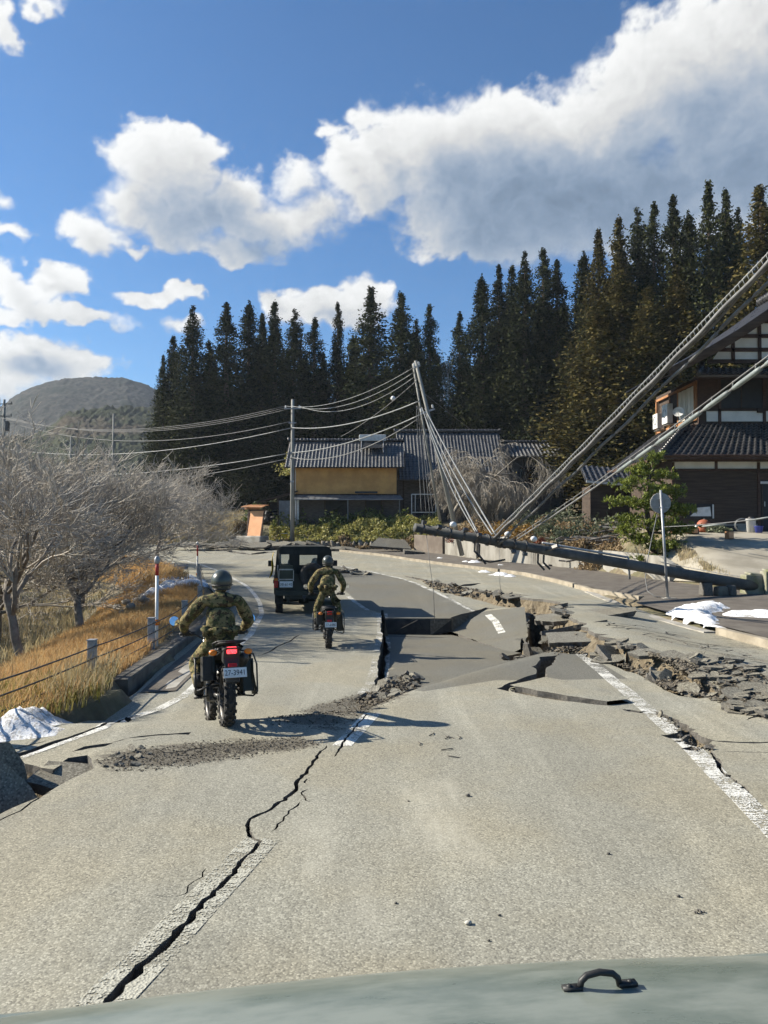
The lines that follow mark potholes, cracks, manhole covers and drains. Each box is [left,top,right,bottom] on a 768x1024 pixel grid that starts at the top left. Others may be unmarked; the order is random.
crack [374,607,768,792]
crack [15,714,368,1003]
